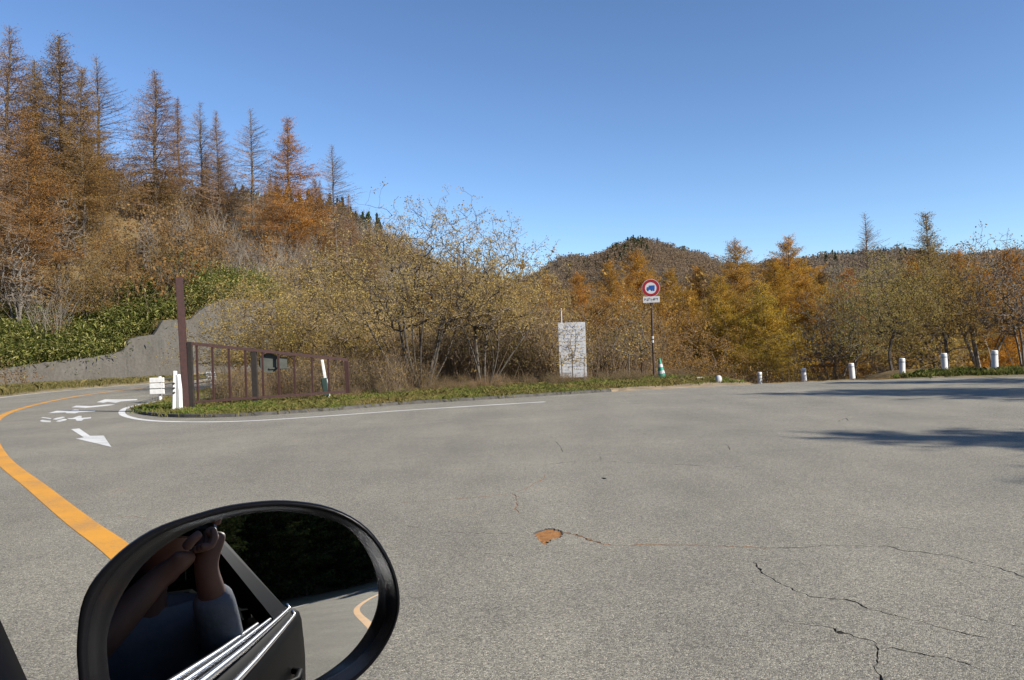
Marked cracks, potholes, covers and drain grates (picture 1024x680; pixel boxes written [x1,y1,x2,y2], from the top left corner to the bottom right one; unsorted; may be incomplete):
pothole [533,528,563,545]
crack [791,622,985,680]
crack [560,531,1023,638]
